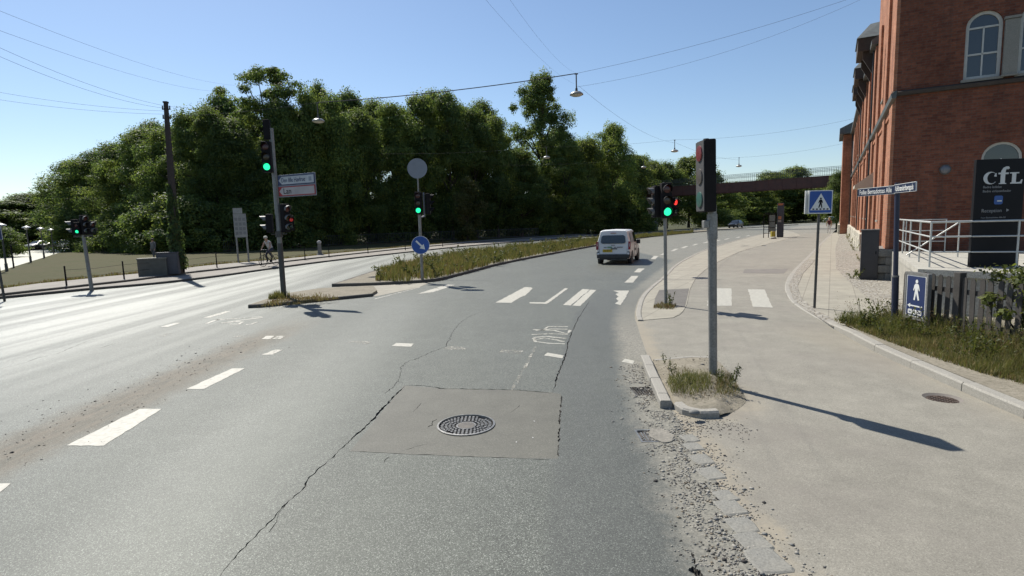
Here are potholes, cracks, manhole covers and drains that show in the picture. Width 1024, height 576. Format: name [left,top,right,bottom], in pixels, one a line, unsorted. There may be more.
drain grate [630,387,654,395]
manhole cover [437,414,495,436]
crack [220,302,589,576]
